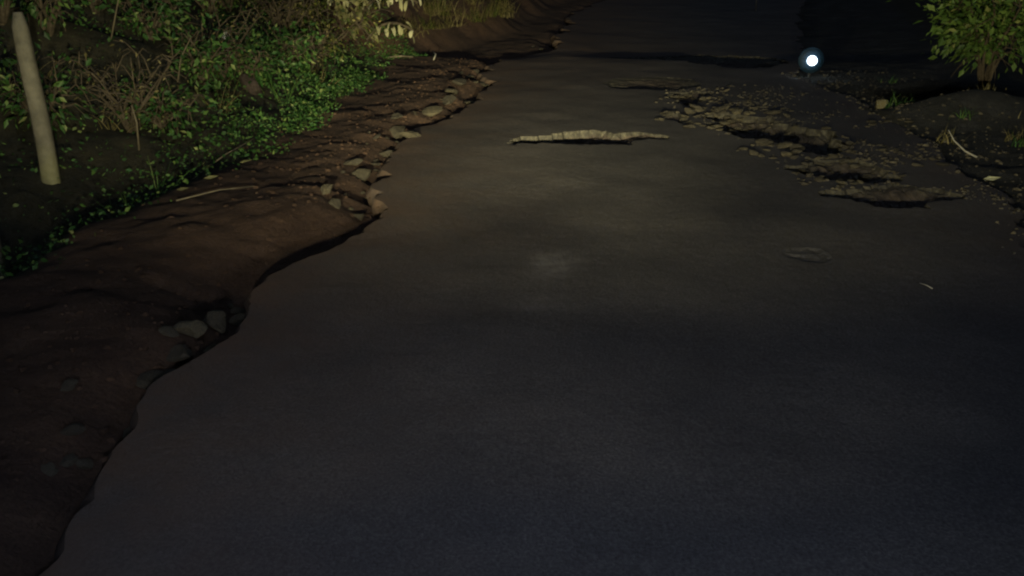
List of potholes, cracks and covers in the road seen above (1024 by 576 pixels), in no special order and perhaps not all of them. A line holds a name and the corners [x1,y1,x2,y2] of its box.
pothole [781,247,833,263]
pothole [664,113,689,123]
pothole [667,91,714,105]
pothole [818,184,966,209]
pothole [783,158,903,184]
pothole [702,113,846,155]
